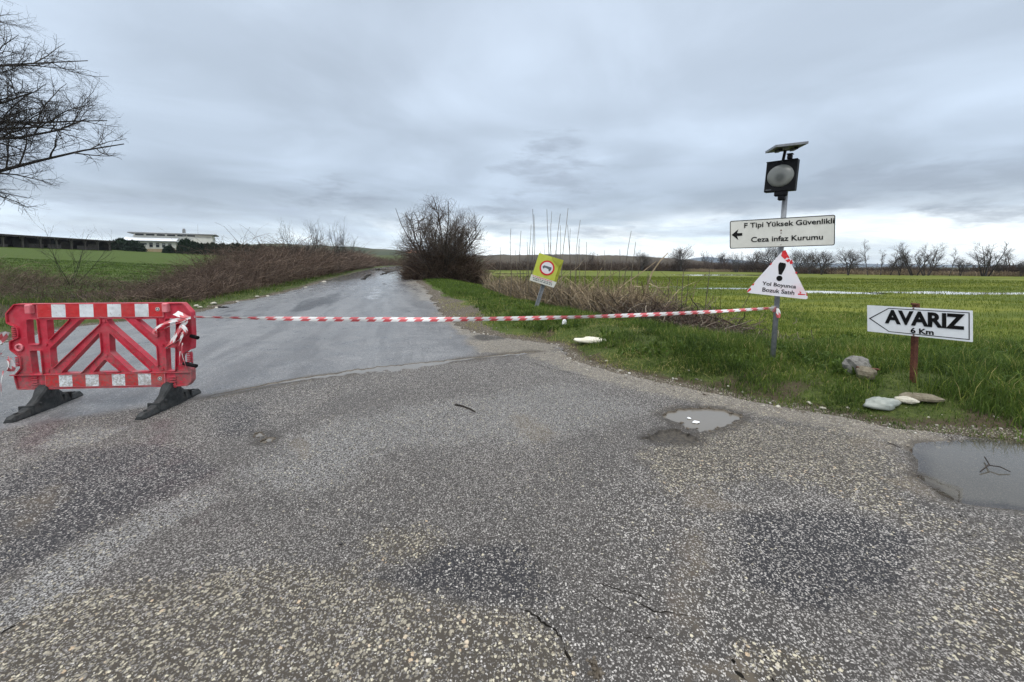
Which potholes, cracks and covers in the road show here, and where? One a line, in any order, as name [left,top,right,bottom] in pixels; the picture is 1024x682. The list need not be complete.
crack [519,608,571,662]
pothole [662,406,743,433]
crack [589,578,687,641]
pothole [641,428,699,444]
